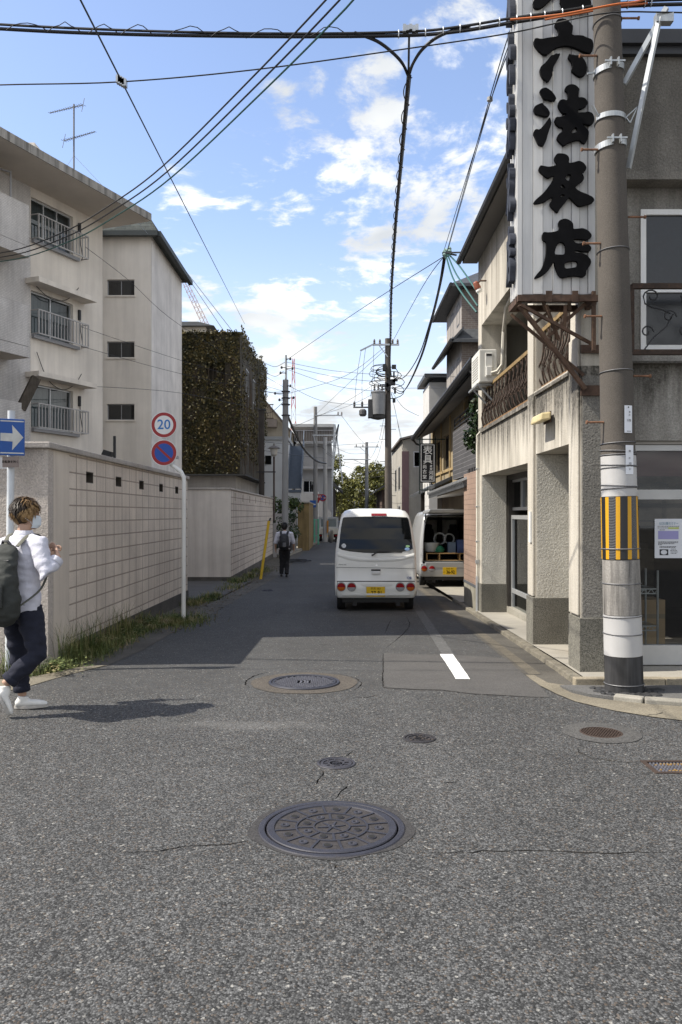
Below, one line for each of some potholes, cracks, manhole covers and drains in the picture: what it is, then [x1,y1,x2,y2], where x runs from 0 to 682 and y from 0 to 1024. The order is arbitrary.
manhole cover [251,672,358,694]
utility cover [317,757,356,770]
utility cover [403,733,436,743]
drain grate [640,760,682,774]
manhole cover [247,801,415,860]
crack [129,841,247,853]
manhole cover [562,722,642,743]
